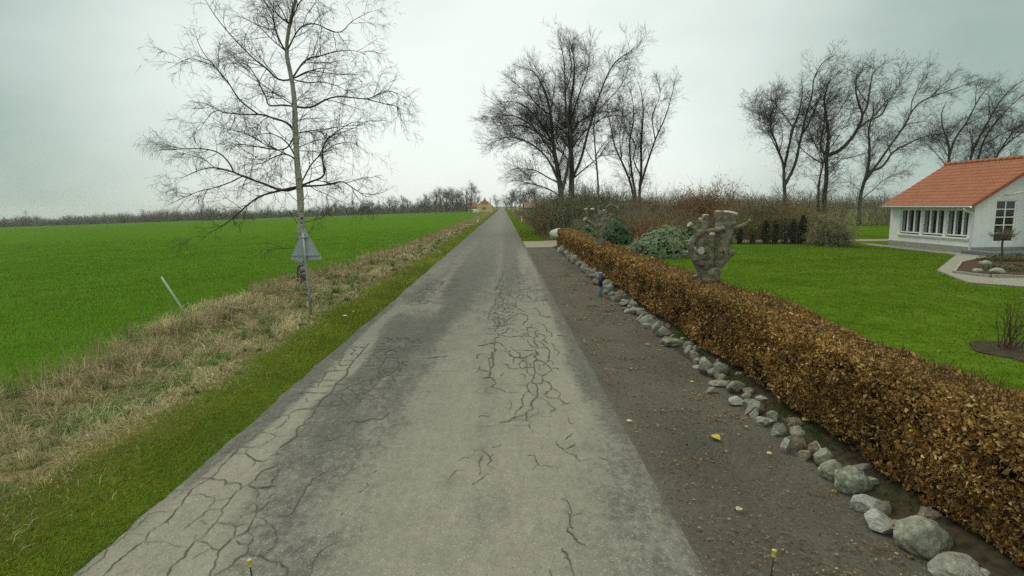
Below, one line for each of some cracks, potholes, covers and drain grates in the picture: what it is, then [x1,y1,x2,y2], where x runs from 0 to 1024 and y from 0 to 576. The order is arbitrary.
crack [550,499,585,576]
crack [449,445,500,484]
crack [531,417,608,469]
crack [76,337,440,576]
crack [476,266,569,432]
